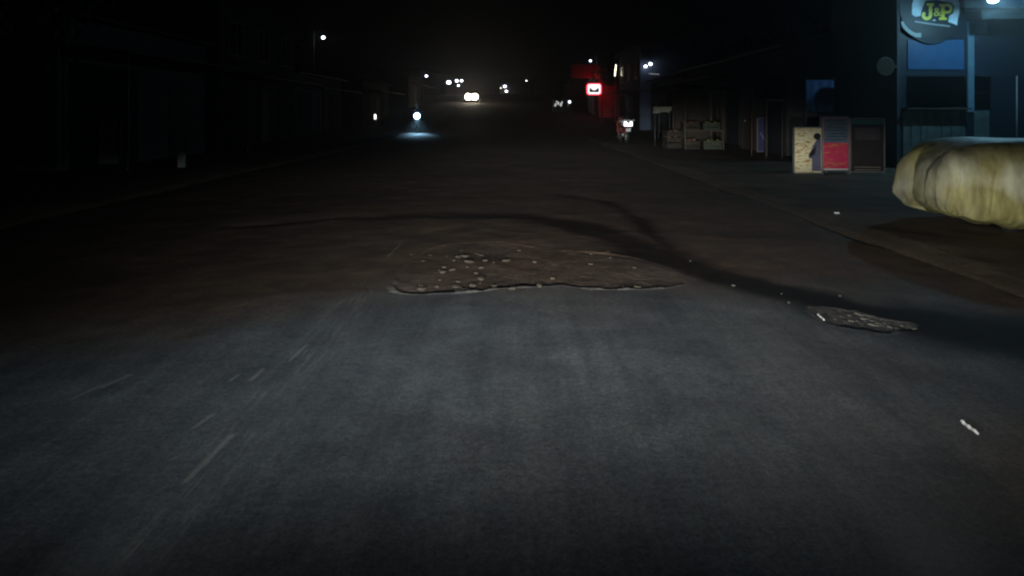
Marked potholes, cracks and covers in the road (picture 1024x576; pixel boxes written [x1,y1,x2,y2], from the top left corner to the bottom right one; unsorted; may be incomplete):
pothole [383,240,693,295]
pothole [794,304,931,337]
